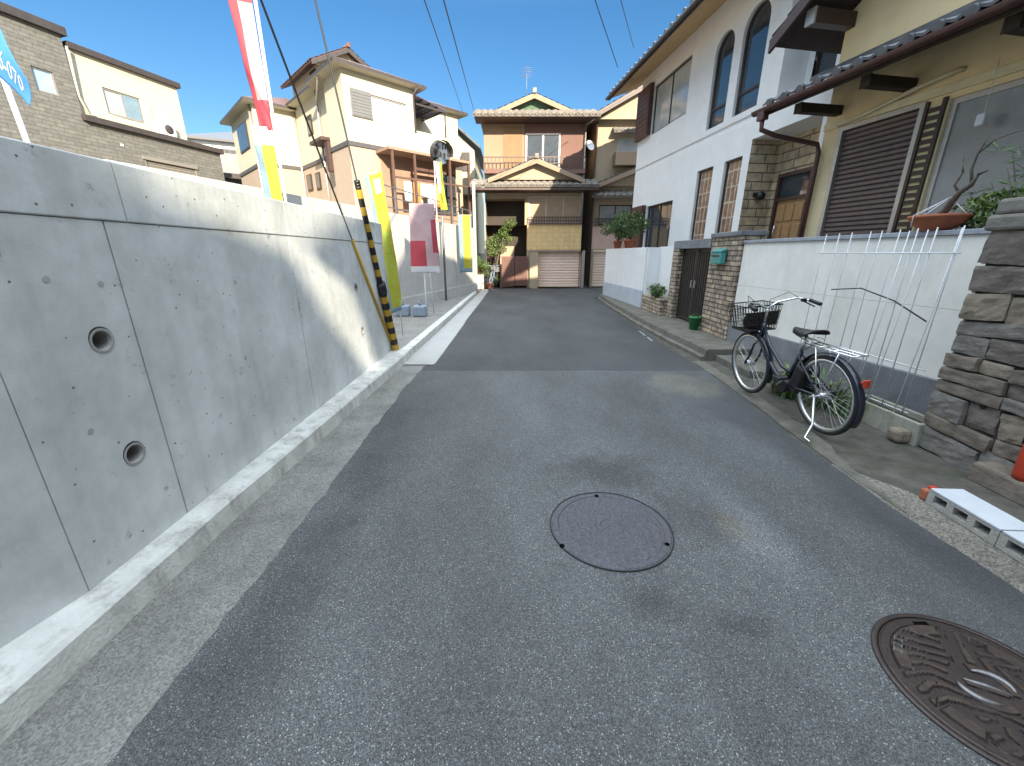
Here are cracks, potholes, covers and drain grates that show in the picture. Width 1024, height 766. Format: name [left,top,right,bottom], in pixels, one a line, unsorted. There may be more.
manhole cover [550,492,674,572]
manhole cover [871,613,1024,766]
